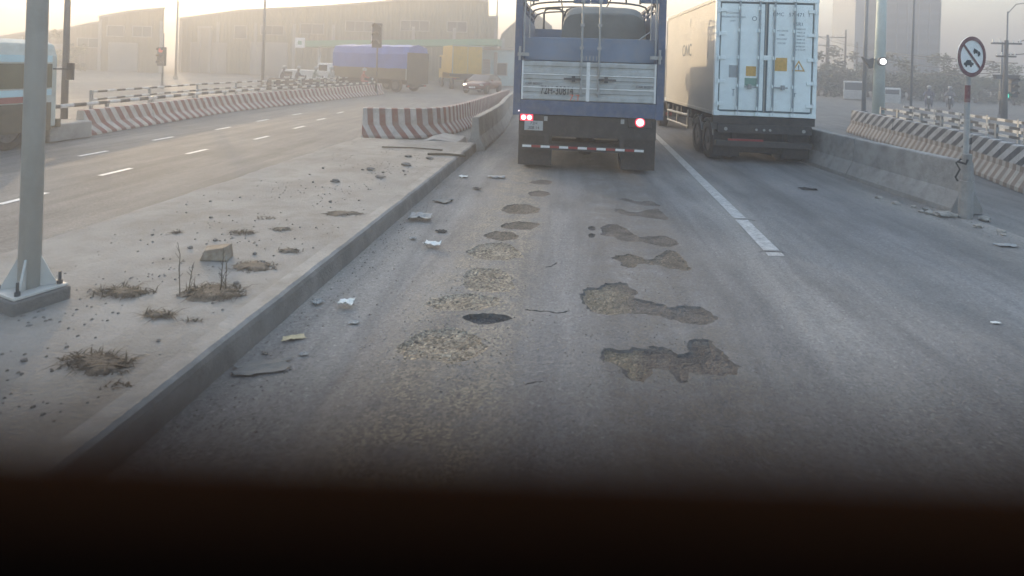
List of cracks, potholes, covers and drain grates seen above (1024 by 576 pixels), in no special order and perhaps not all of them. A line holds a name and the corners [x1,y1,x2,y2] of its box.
pothole [600,339,742,384]
pothole [501,204,540,214]
pothole [426,293,500,311]
pothole [620,198,660,206]
pothole [396,327,489,364]
pothole [501,221,540,230]
pothole [611,250,691,271]
pothole [600,224,679,247]
pothole [466,242,523,260]
pothole [462,313,513,324]
pothole [484,231,519,241]
pothole [614,209,668,220]
